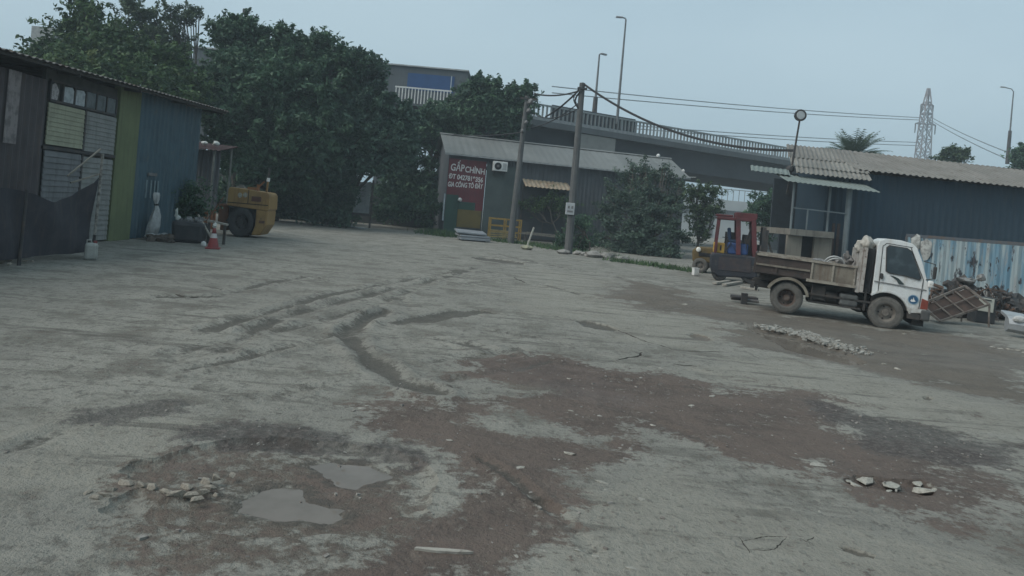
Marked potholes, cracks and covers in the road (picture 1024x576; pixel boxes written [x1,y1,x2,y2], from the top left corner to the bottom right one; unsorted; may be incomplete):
pothole [98,436,439,539]
crack [557,316,716,367]
pothole [841,475,938,498]
